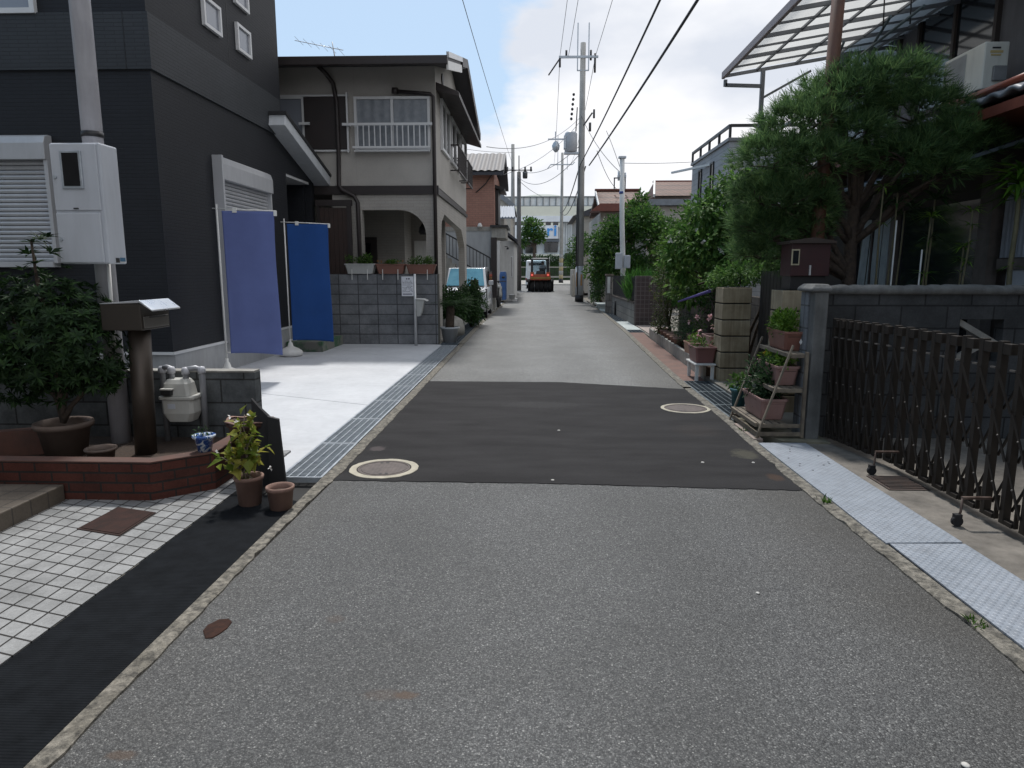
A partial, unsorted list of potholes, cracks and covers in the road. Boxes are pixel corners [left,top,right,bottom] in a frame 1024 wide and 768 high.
manhole cover [349,459,419,479]
manhole cover [661,403,711,413]
manhole cover [203,619,232,639]
utility cover [77,507,156,536]
drain grate [684,381,726,392]
